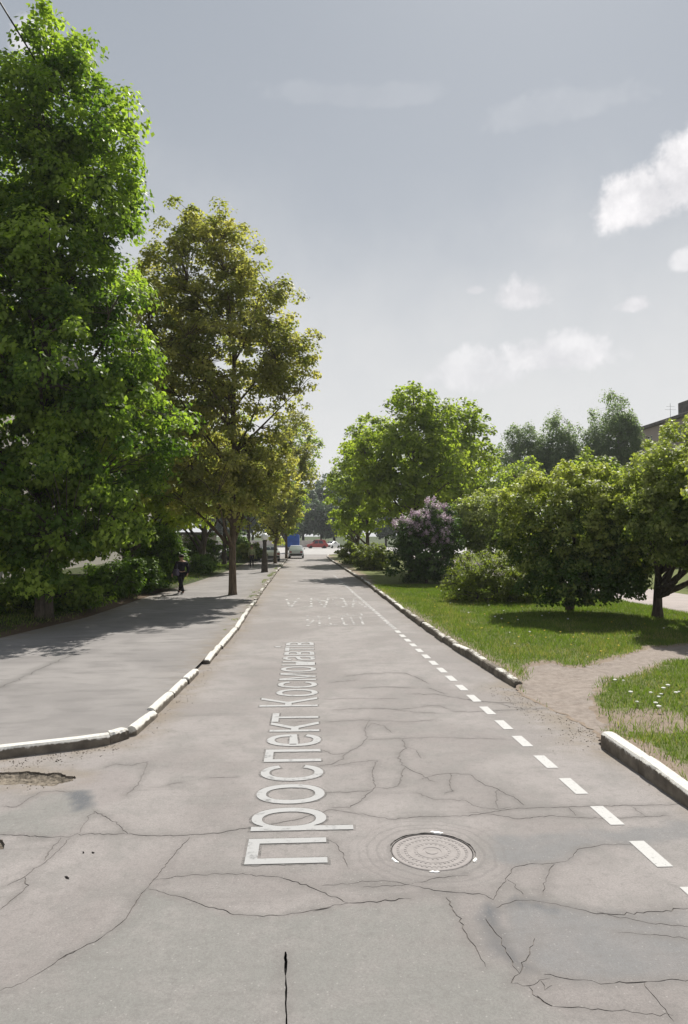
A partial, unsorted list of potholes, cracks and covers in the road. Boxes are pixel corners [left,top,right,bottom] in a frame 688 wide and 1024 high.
manhole cover [390,831,478,873]
crack [0,773,688,1019]
pothole [0,771,76,786]
crack [321,673,540,808]
